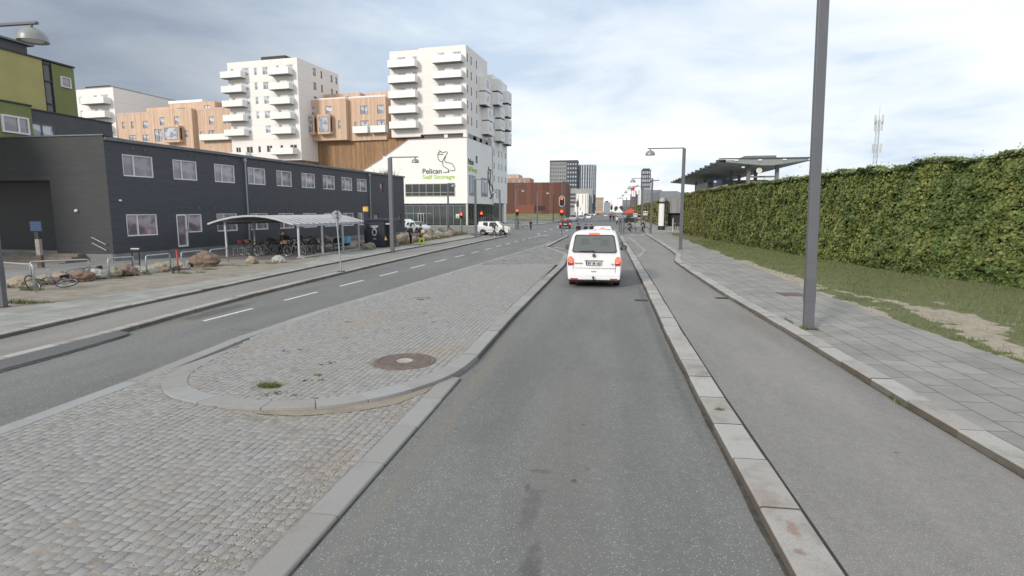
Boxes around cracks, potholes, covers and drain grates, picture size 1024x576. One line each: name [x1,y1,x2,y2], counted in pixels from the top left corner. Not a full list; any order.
manhole cover [374,353,436,370]
